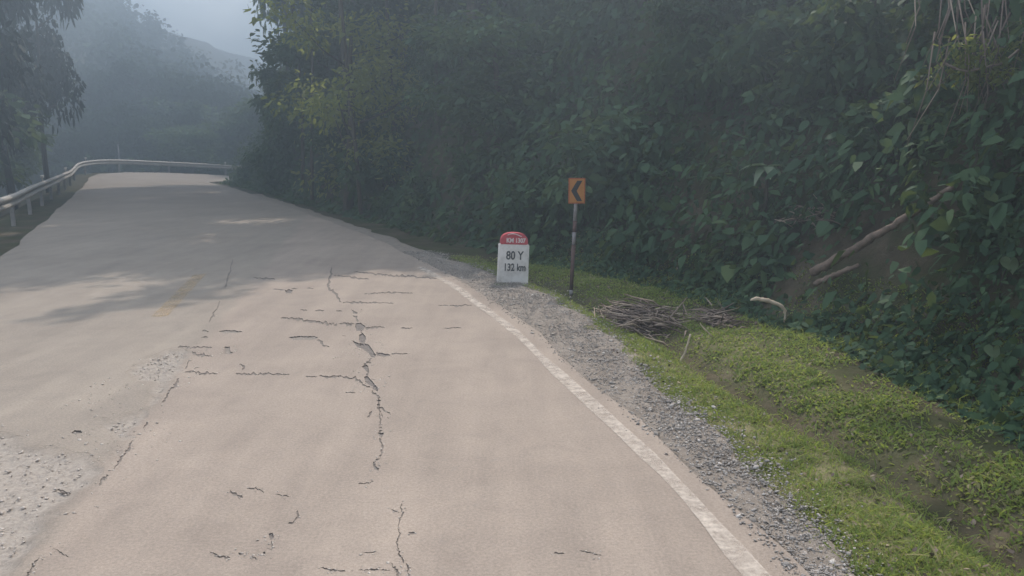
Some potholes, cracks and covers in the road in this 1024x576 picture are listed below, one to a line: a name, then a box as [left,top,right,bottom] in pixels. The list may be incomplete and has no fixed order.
crack [236,267,412,462]
crack [230,487,299,524]
crack [321,504,415,576]
pothole [0,431,105,576]
crack [179,330,216,375]
